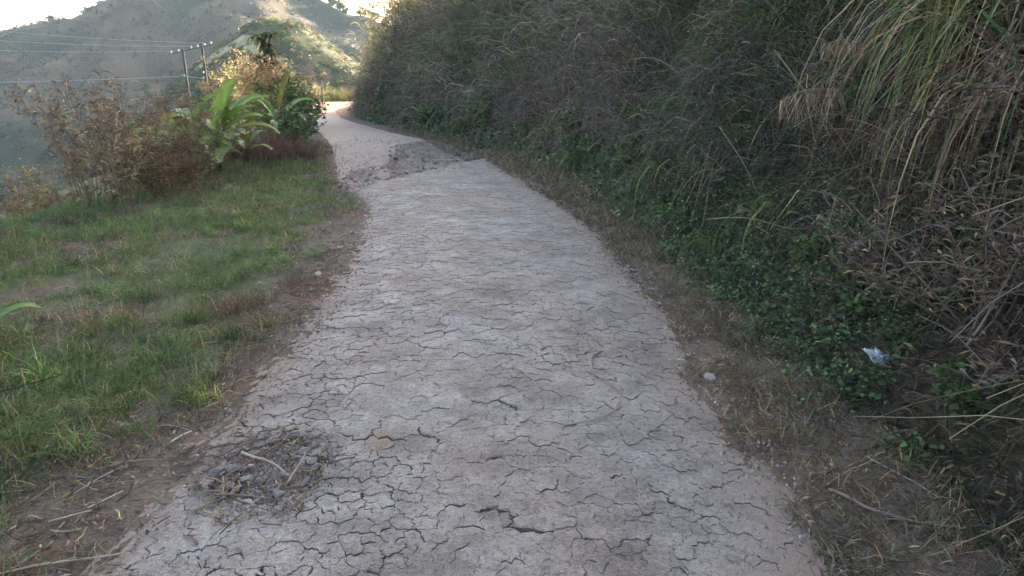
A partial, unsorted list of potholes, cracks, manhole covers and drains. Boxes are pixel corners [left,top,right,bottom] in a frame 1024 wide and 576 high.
pothole [385,140,466,179]
crack [283,160,676,386]
pothole [209,438,332,505]
crack [126,367,825,576]
